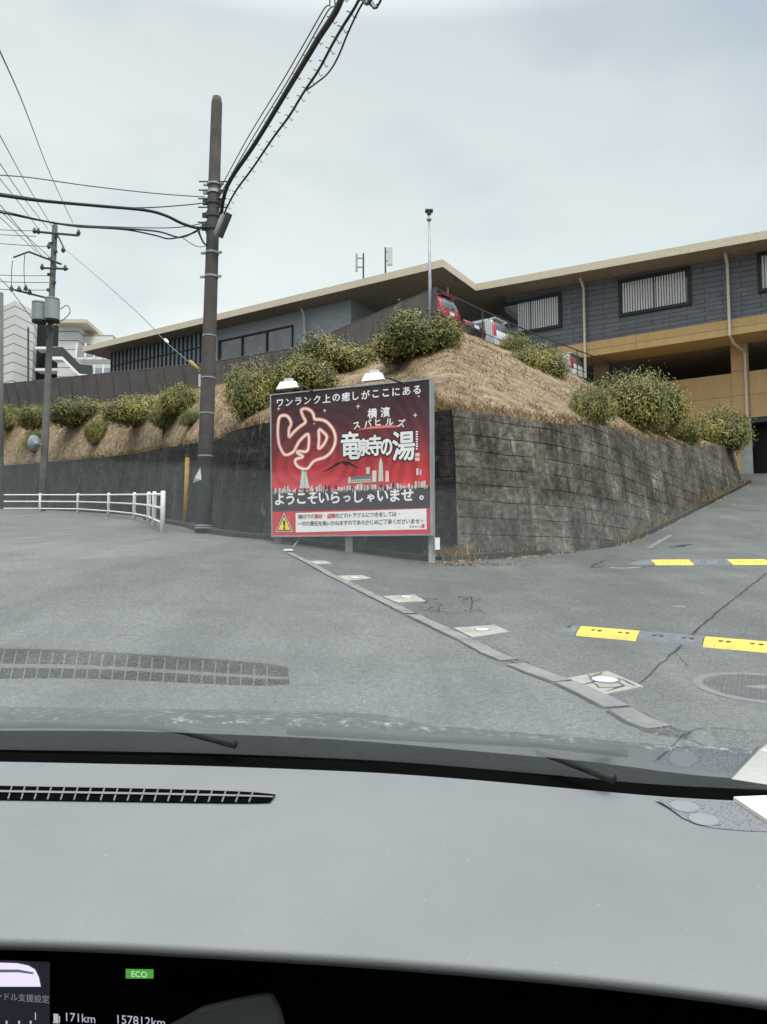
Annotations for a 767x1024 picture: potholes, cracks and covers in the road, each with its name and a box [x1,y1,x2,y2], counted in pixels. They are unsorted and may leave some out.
crack [585,573,767,691]
utility cover [569,671,643,695]
crack [415,596,486,614]
utility cover [454,625,510,638]
manhole cover [693,672,767,704]
